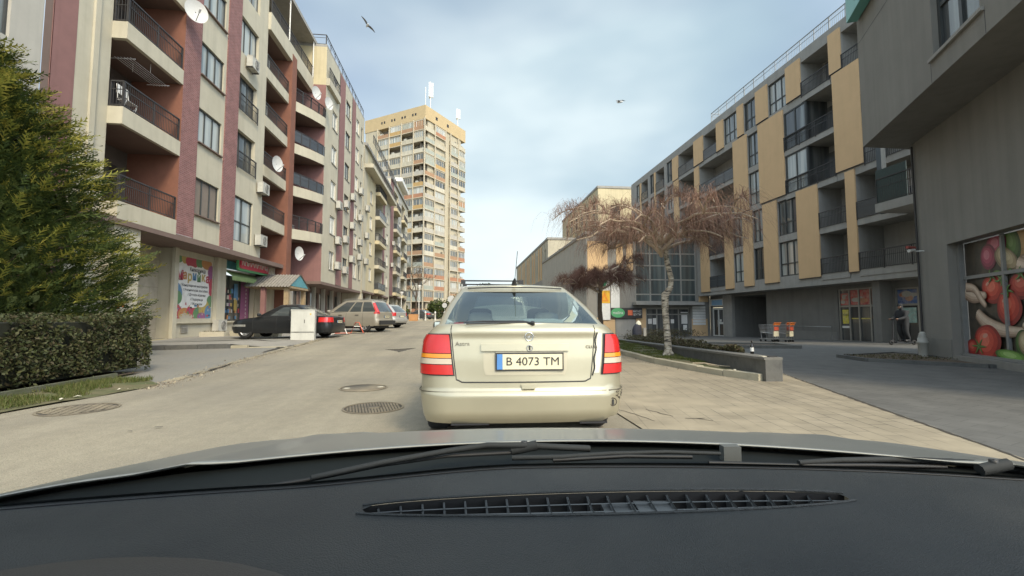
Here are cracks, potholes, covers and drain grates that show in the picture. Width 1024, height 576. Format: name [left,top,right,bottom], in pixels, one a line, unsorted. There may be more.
manhole cover [32,403,122,416]
manhole cover [338,384,388,392]
manhole cover [341,402,404,414]
